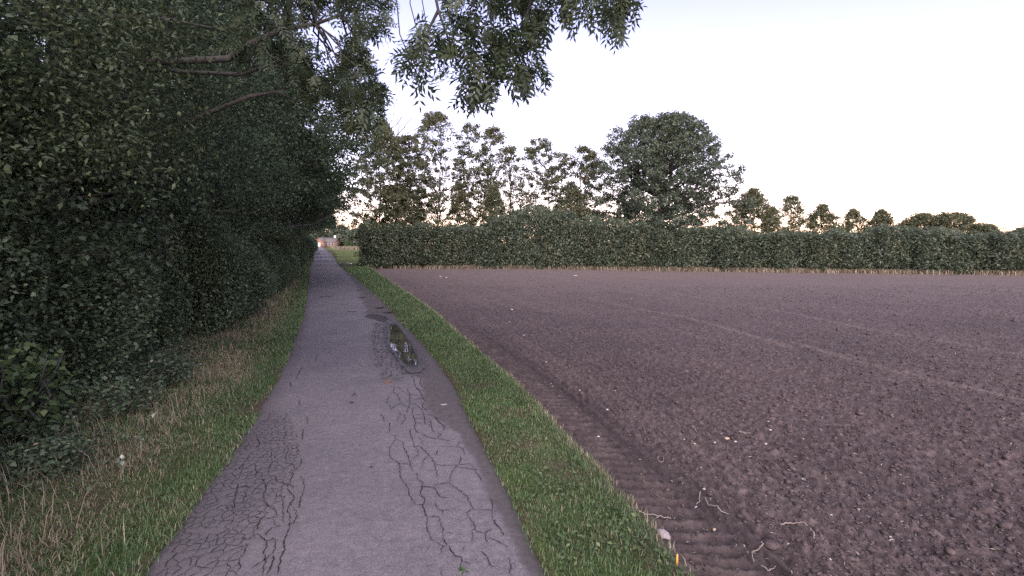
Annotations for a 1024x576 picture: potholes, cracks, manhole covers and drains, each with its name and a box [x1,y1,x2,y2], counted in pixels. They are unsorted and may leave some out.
crack [371,326,512,575]
pothole [386,320,425,373]
crack [155,357,317,576]
